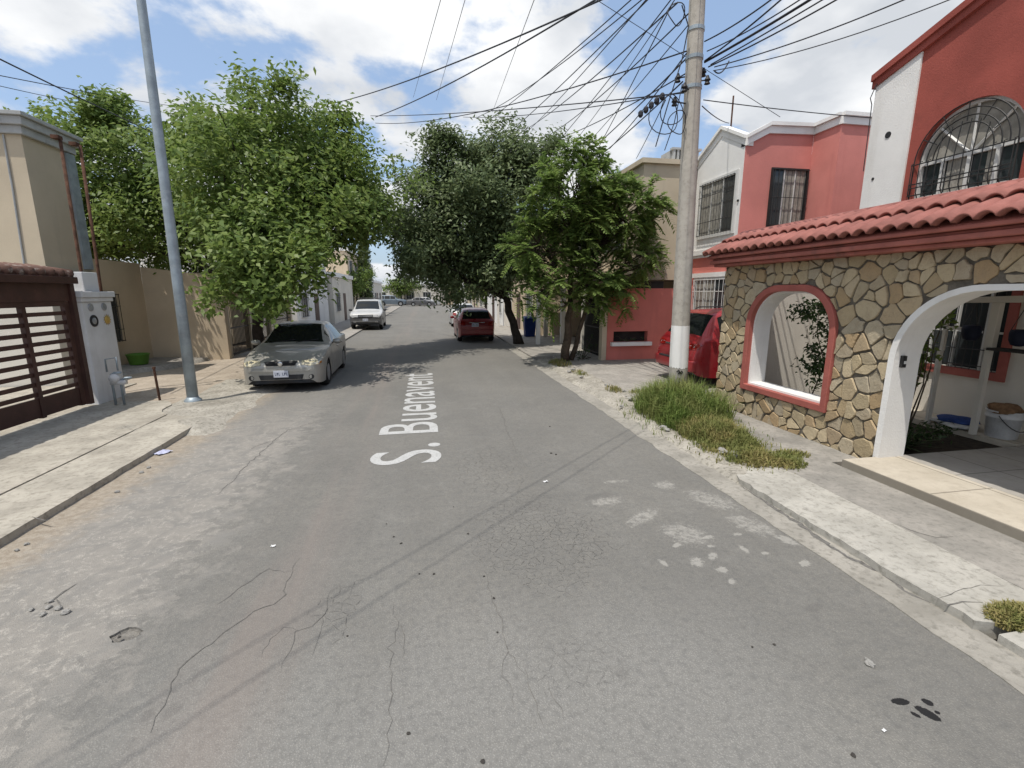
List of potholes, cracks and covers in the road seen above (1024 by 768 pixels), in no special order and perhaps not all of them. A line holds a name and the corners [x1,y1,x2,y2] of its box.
crack [261,579,362,667]
crack [383,606,405,765]
crack [151,558,300,730]
pothole [109,627,144,643]
